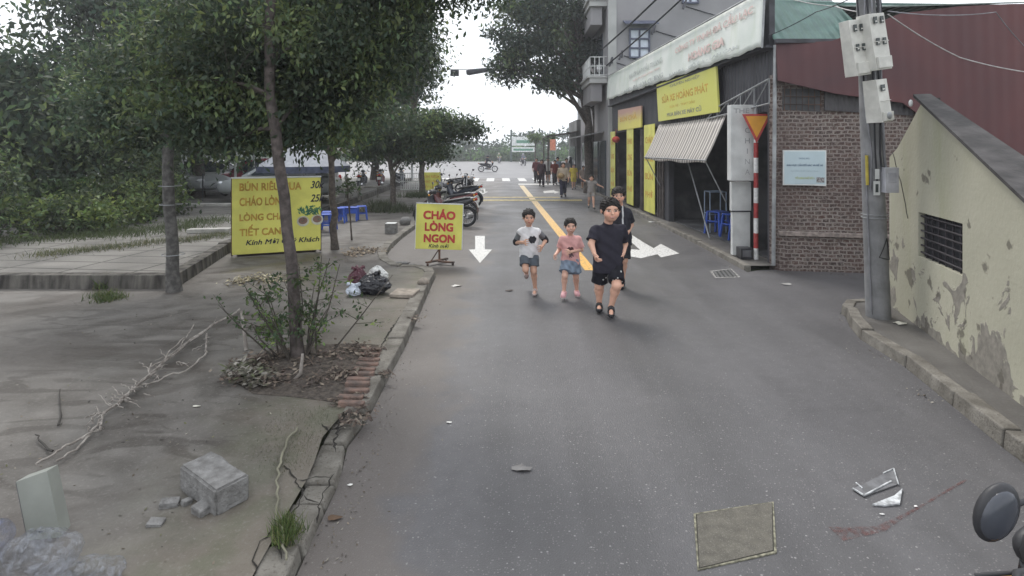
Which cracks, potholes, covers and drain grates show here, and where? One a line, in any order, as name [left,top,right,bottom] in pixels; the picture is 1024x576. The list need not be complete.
crack [252,465,335,571]
manhole cover [694,501,777,571]
